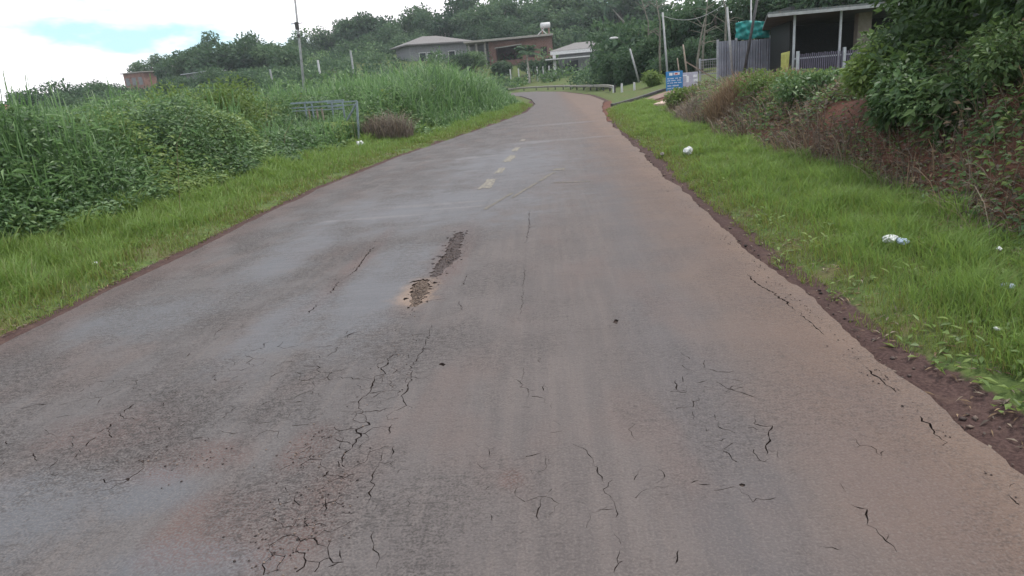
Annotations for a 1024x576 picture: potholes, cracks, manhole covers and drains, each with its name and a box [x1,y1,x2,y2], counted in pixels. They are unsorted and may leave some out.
crack [508,357,669,571]
pothole [403,279,440,309]
crack [12,380,182,494]
crack [262,276,467,575]
crack [748,275,823,334]
crack [670,355,778,502]
crack [183,332,356,447]
pothole [430,232,468,277]
crack [841,485,897,552]
